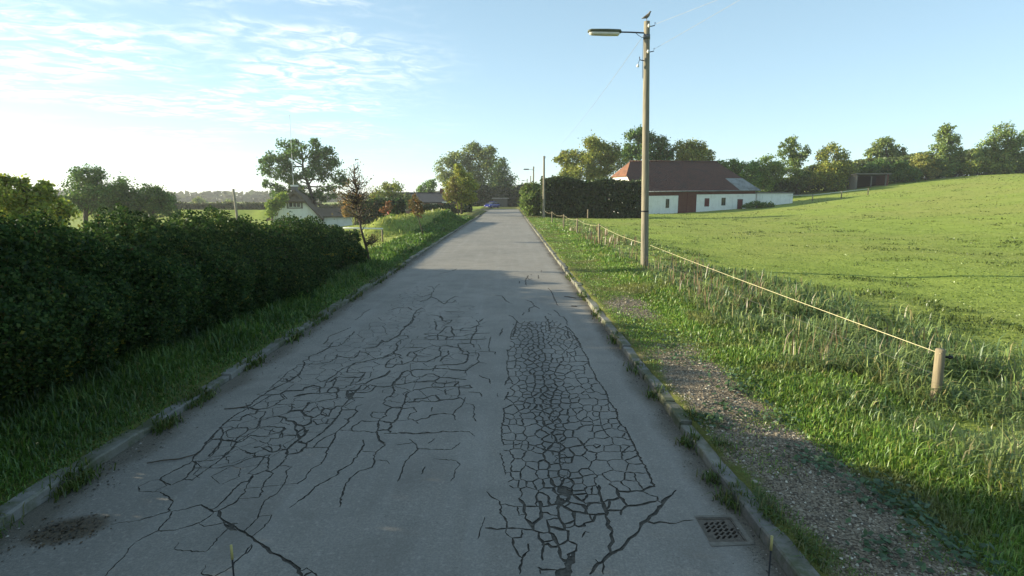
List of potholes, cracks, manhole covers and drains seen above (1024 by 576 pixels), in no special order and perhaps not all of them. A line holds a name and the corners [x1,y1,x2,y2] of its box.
drain grate [694,515,754,546]
crack [105,269,691,576]
